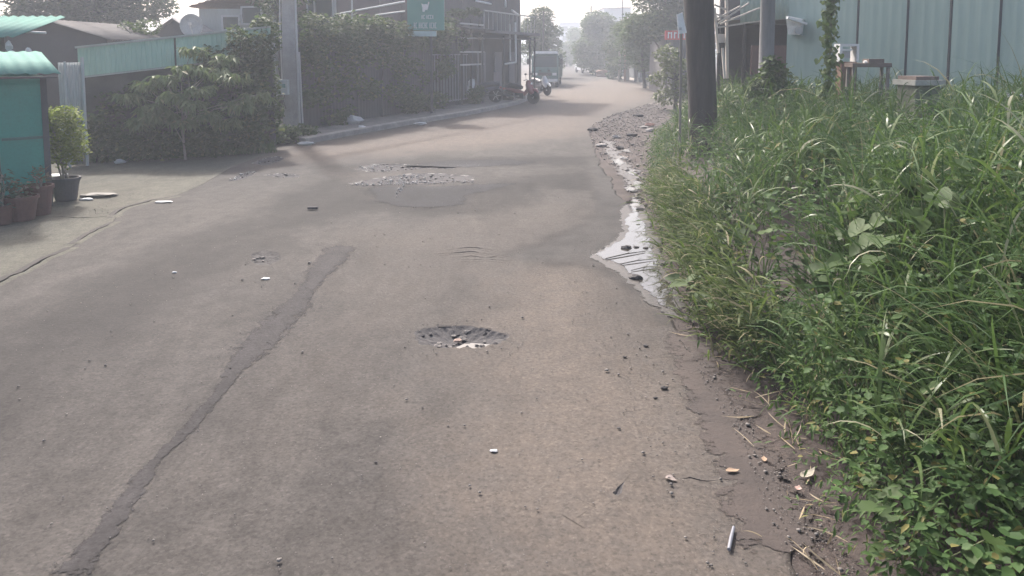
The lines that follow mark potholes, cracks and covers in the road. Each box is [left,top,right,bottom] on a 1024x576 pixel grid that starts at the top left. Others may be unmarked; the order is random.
pothole [351,164,465,173]
pothole [348,172,478,186]
pothole [405,322,519,353]
pothole [243,248,289,268]
